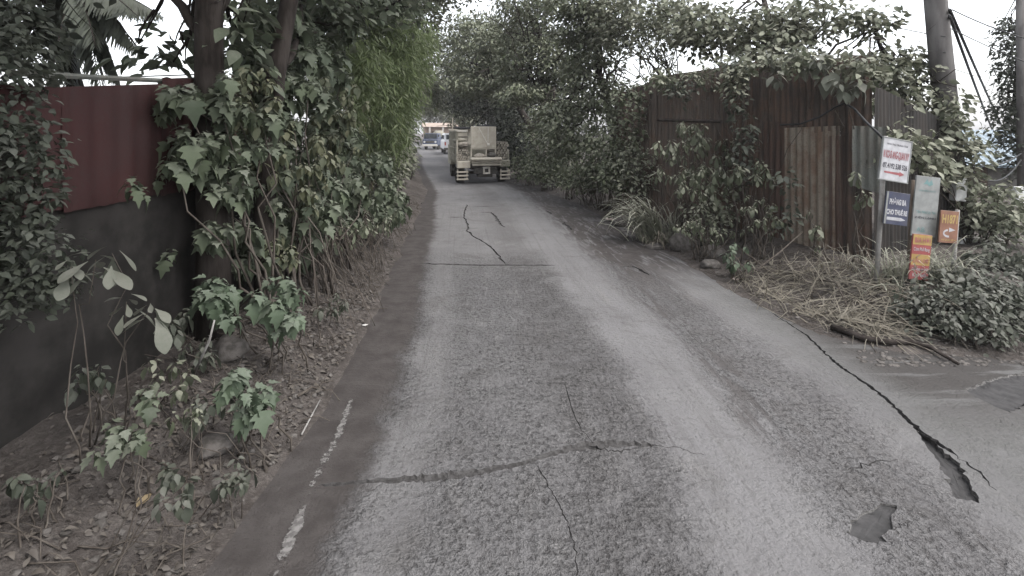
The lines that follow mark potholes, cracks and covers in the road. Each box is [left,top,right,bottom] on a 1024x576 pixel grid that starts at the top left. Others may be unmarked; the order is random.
pothole [917,431,979,503]
crack [774,314,996,490]
crack [424,205,550,266]
pothole [847,503,898,544]
